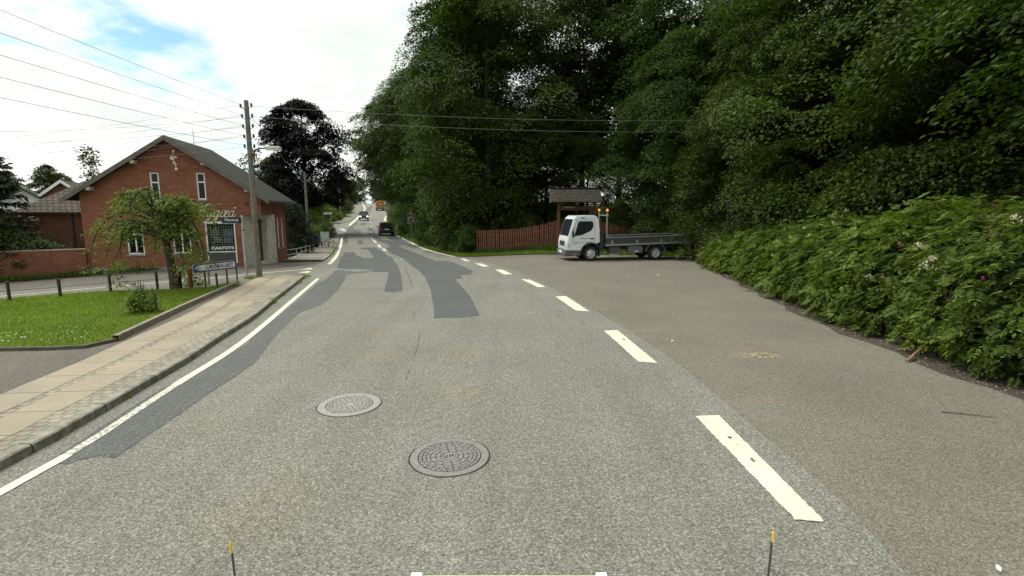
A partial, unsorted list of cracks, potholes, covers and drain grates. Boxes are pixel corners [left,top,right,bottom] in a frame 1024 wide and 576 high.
manhole cover [408,438,491,478]
manhole cover [316,393,382,417]
